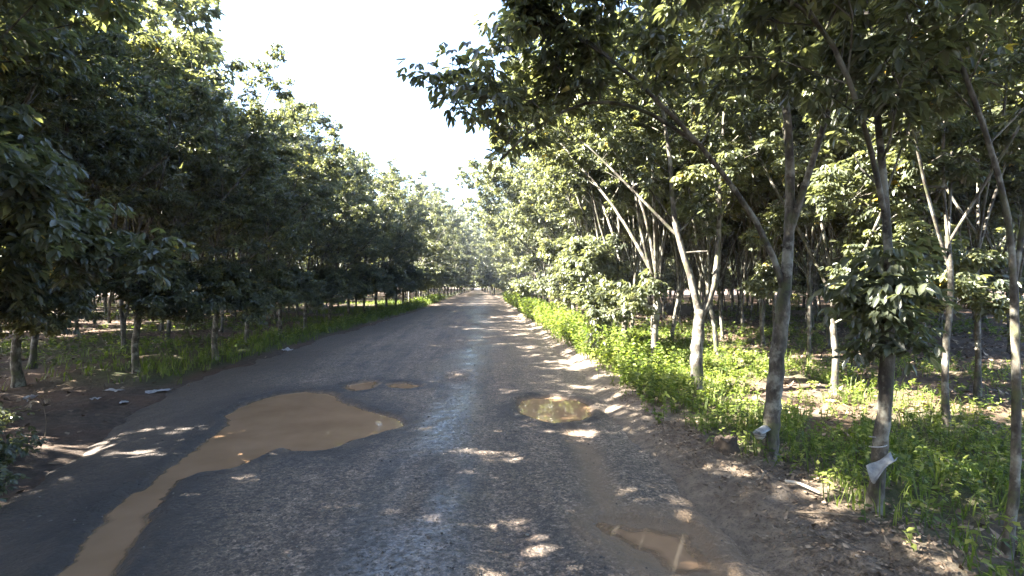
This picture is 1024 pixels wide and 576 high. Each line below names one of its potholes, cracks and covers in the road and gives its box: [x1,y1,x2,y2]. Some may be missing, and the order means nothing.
pothole [514,394,595,423]
pothole [40,389,412,576]
pothole [382,381,425,389]
pothole [590,511,736,576]
pothole [339,379,386,391]
